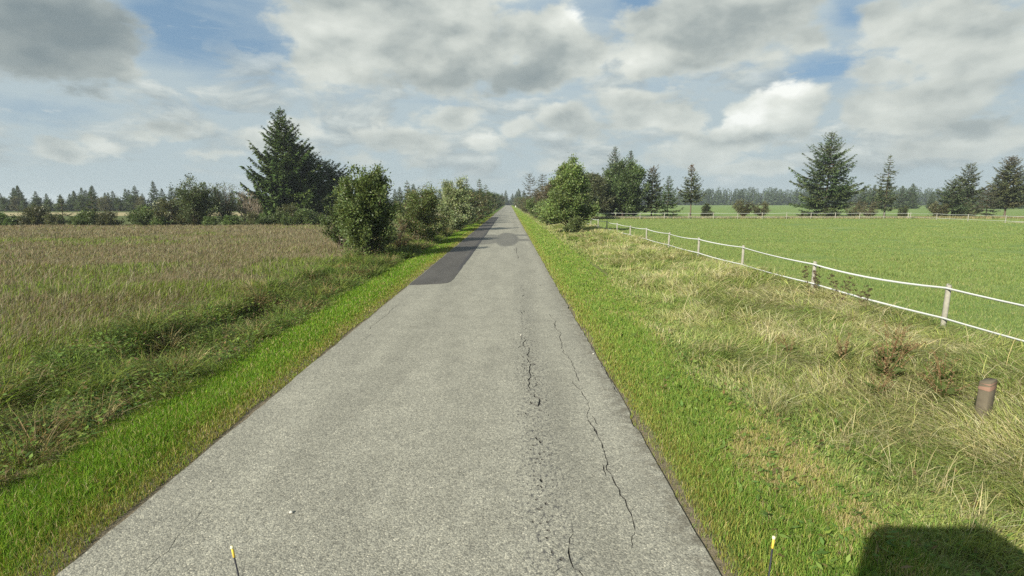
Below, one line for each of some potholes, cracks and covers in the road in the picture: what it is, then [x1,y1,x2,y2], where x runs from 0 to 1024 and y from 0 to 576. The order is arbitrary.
crack [549,314,635,549]
crack [509,285,549,421]
crack [530,437,584,576]
